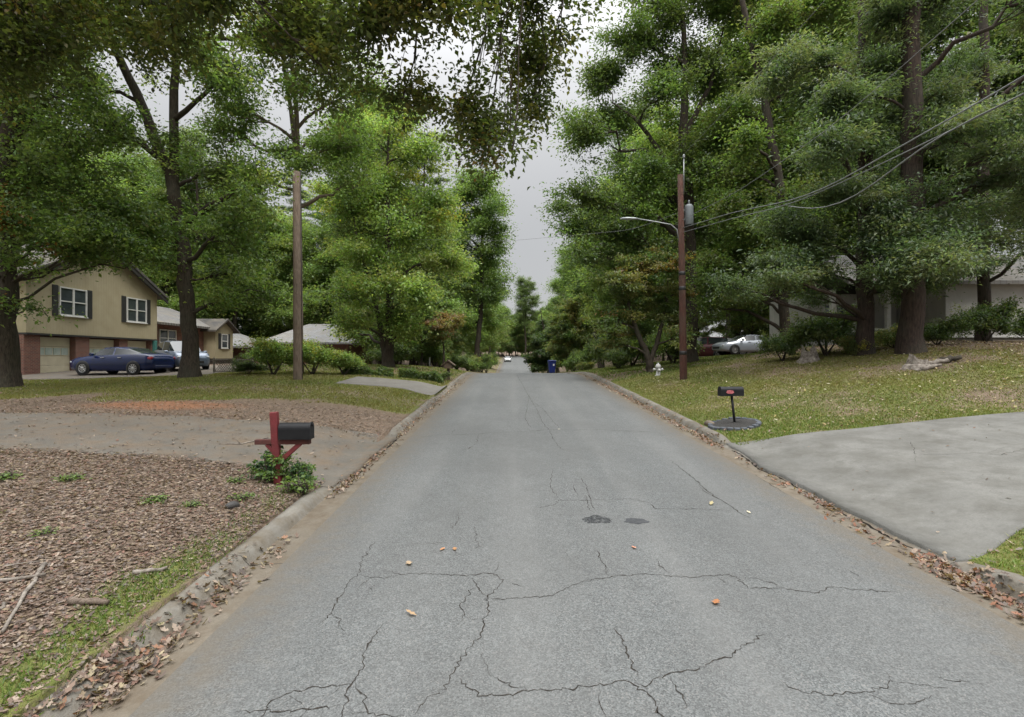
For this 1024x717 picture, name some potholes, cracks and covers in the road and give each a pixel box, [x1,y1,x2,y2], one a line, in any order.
crack [787,676,984,705]
crack [320,544,396,635]
crack [540,466,748,517]
crack [425,384,644,450]
crack [243,624,399,717]
crack [392,552,899,717]
